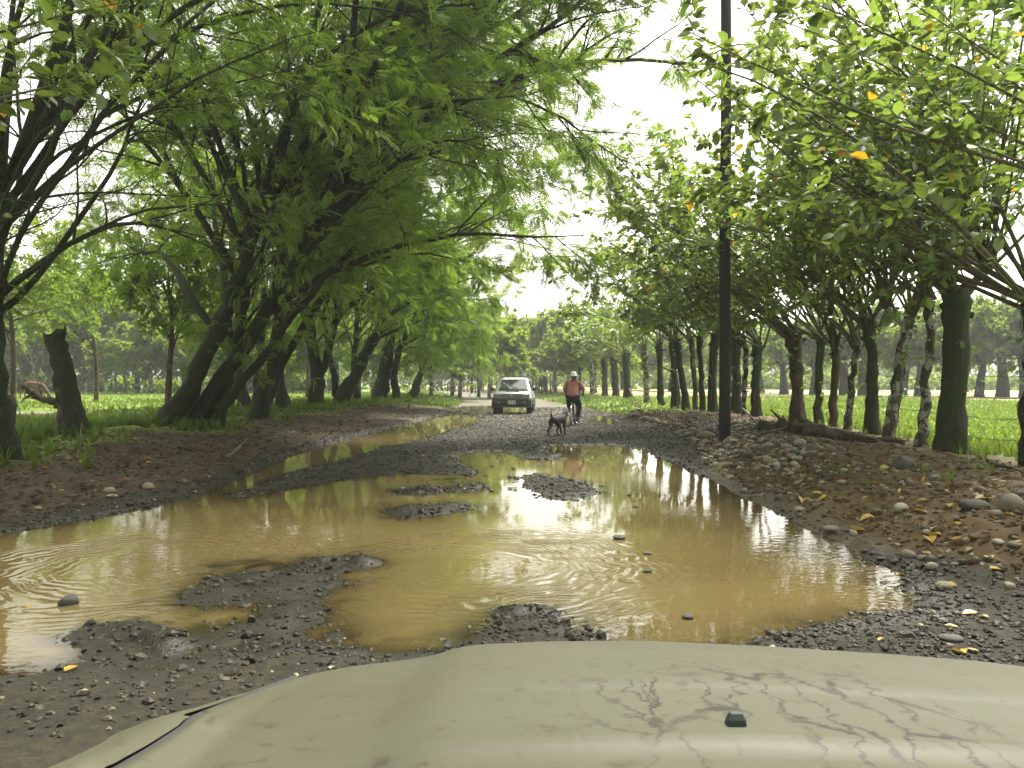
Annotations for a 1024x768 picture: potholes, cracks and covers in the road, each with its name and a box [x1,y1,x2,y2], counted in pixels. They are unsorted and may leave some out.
pothole [0,443,943,680]
pothole [200,413,481,495]
pothole [588,413,619,424]
